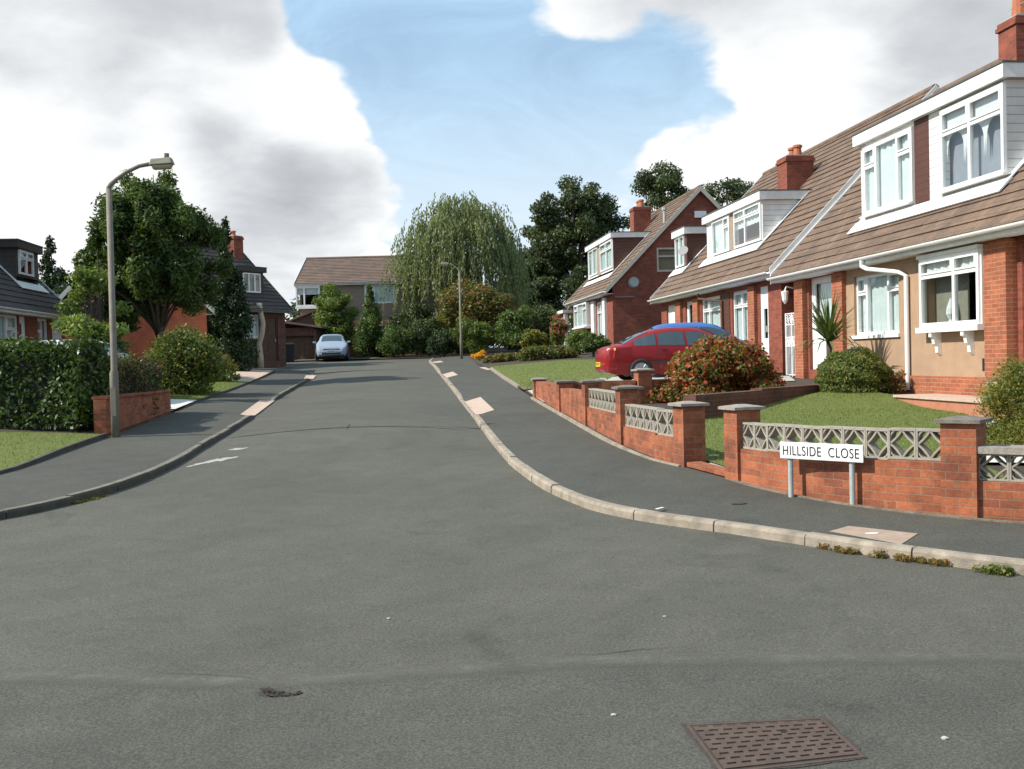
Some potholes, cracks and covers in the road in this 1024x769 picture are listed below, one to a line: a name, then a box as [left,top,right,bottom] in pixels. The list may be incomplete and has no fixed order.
pothole [260,687,301,697]
manhole cover [680,716,868,769]
utility cover [830,526,918,544]
